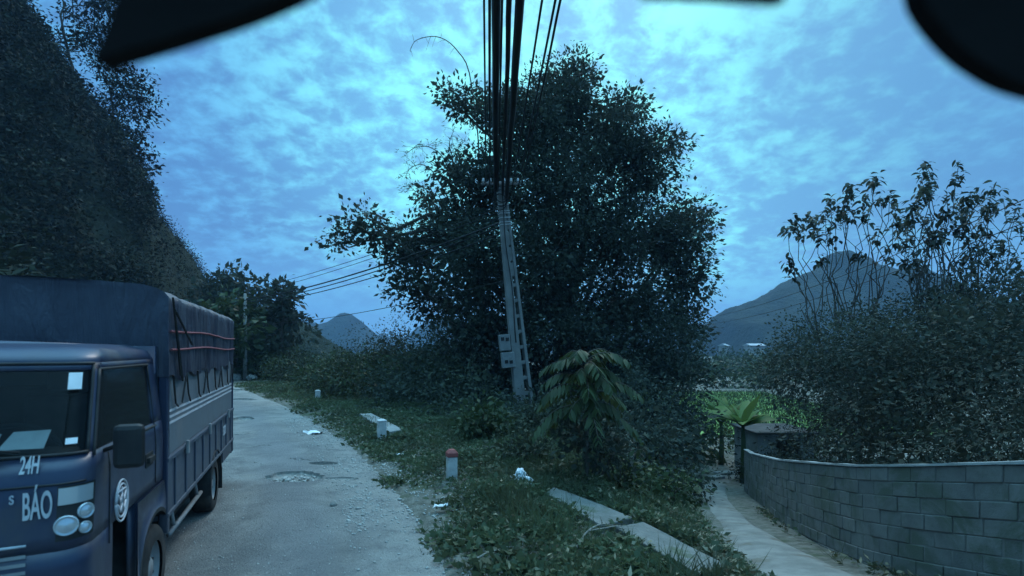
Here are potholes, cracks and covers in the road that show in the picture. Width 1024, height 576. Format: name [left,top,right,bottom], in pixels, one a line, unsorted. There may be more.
pothole [263,471,325,482]
